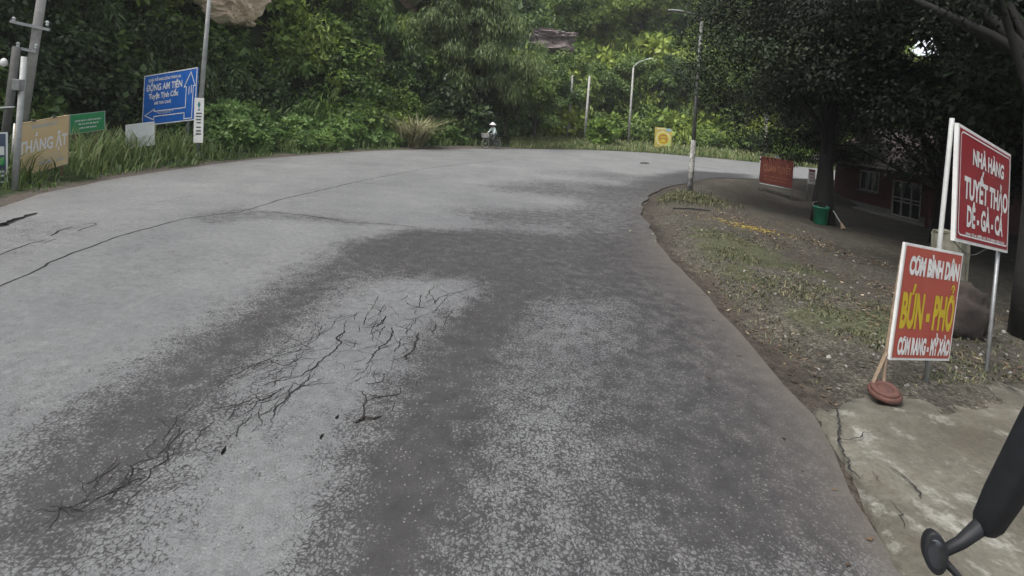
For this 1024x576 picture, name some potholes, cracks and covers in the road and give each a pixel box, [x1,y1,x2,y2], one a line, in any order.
crack [26,286,471,533]
crack [0,223,96,255]
crack [836,408,922,527]
